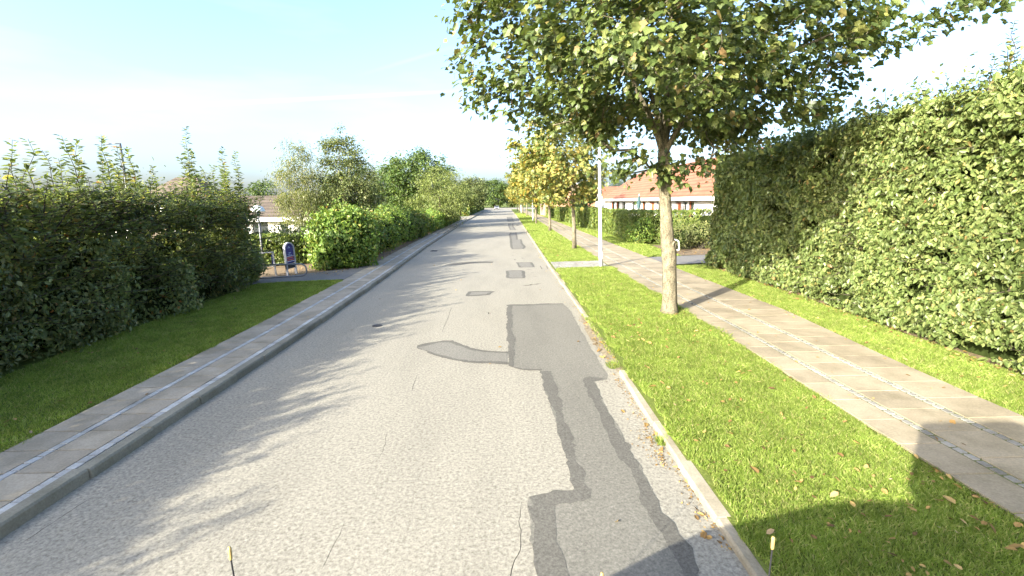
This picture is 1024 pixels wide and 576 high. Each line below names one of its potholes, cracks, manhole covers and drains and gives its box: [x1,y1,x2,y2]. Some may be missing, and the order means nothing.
crack [510,510,522,576]
